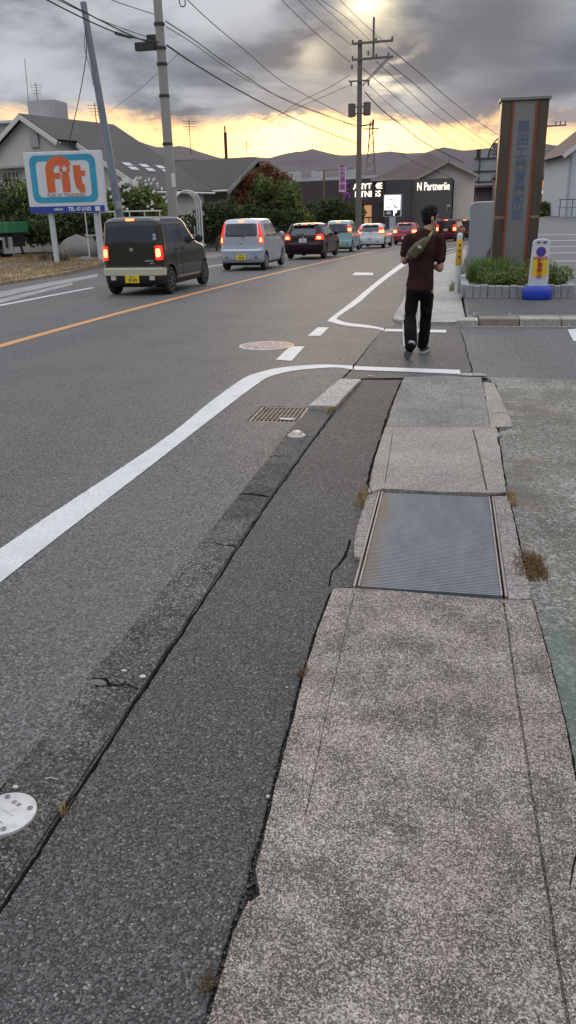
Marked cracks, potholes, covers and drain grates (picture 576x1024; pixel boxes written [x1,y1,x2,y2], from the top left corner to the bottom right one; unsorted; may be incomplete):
drain grate [249,407,309,423]
crack [0,411,357,1014]
manhole cover [239,341,294,350]
drain grate [353,491,508,599]
